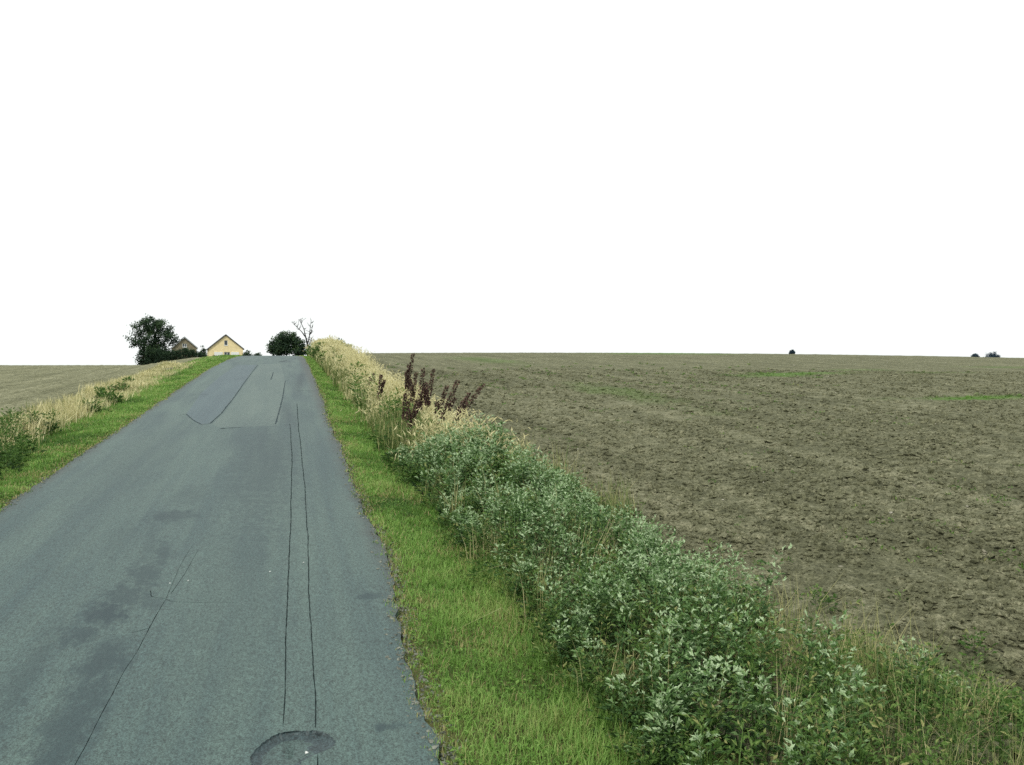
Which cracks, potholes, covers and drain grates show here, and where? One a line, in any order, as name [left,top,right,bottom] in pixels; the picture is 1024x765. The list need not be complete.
pothole [250,730,335,765]
